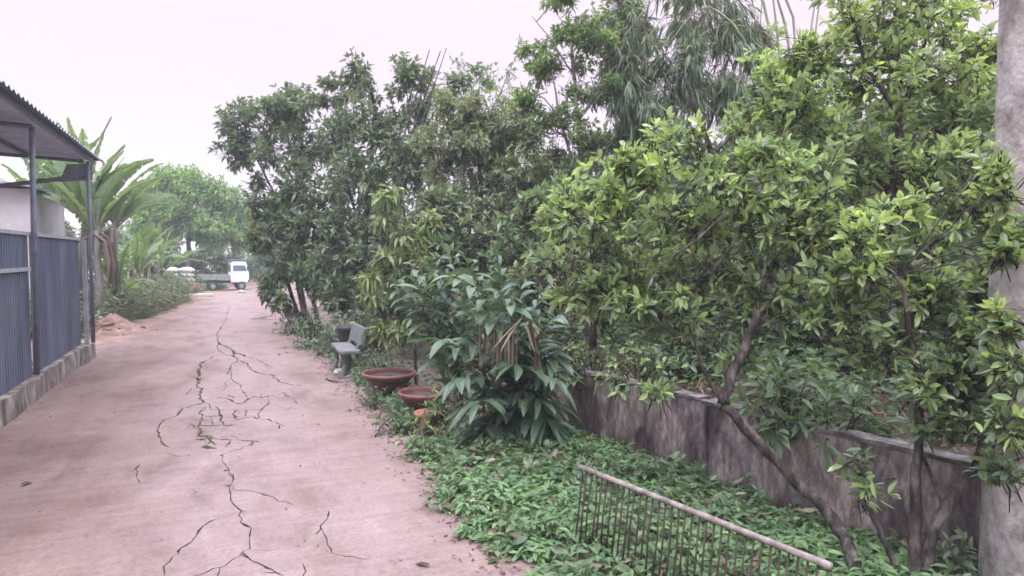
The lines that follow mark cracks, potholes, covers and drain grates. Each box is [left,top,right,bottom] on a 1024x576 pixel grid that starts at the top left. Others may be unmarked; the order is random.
crack [302,511,361,576]
crack [156,306,300,576]
